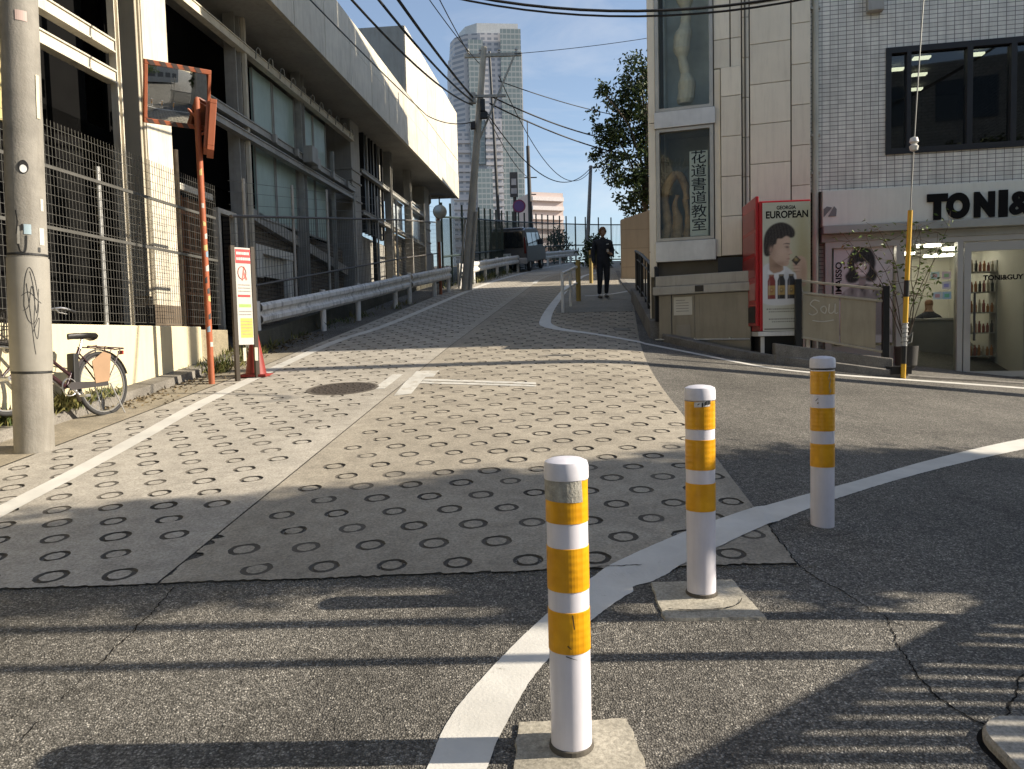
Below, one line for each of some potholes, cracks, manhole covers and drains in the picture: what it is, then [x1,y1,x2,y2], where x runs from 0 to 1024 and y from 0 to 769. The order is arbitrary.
manhole cover [306,382,379,396]
crack [1005,674,1024,716]
crack [13,587,174,745]
crack [751,507,985,725]
